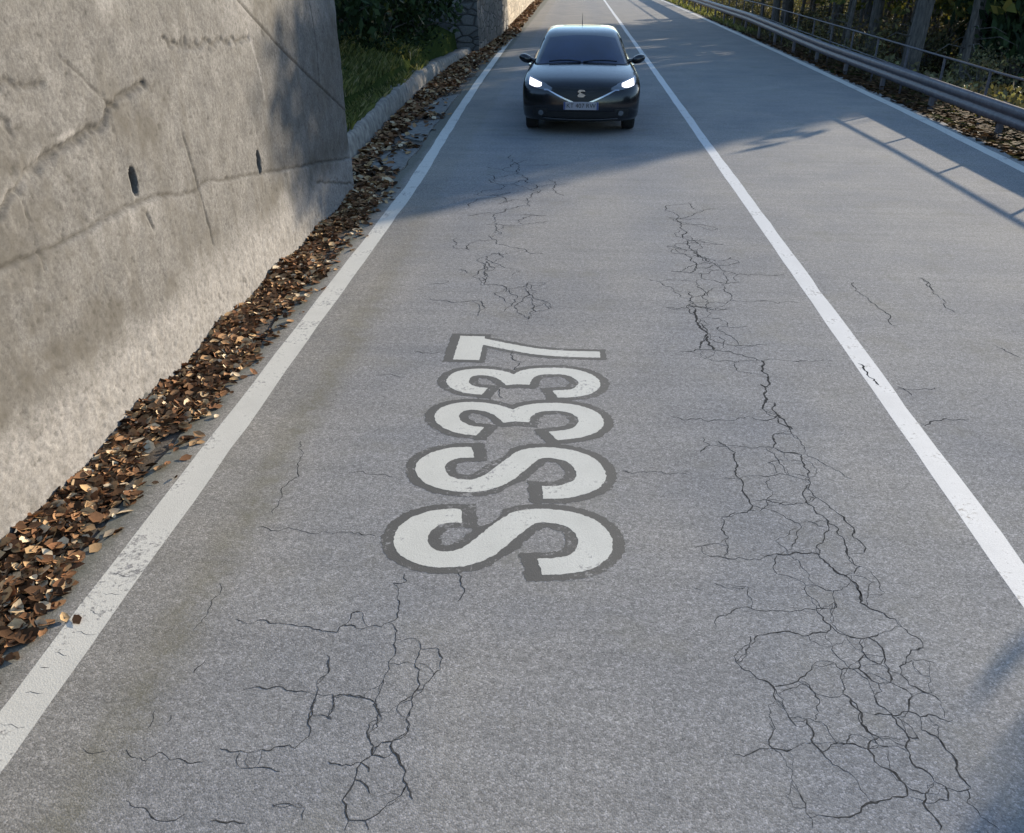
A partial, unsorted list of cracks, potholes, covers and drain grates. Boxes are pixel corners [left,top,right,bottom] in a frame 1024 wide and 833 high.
crack [219,573,465,830]
crack [148,441,375,728]
crack [430,155,570,397]
crack [649,202,999,831]
